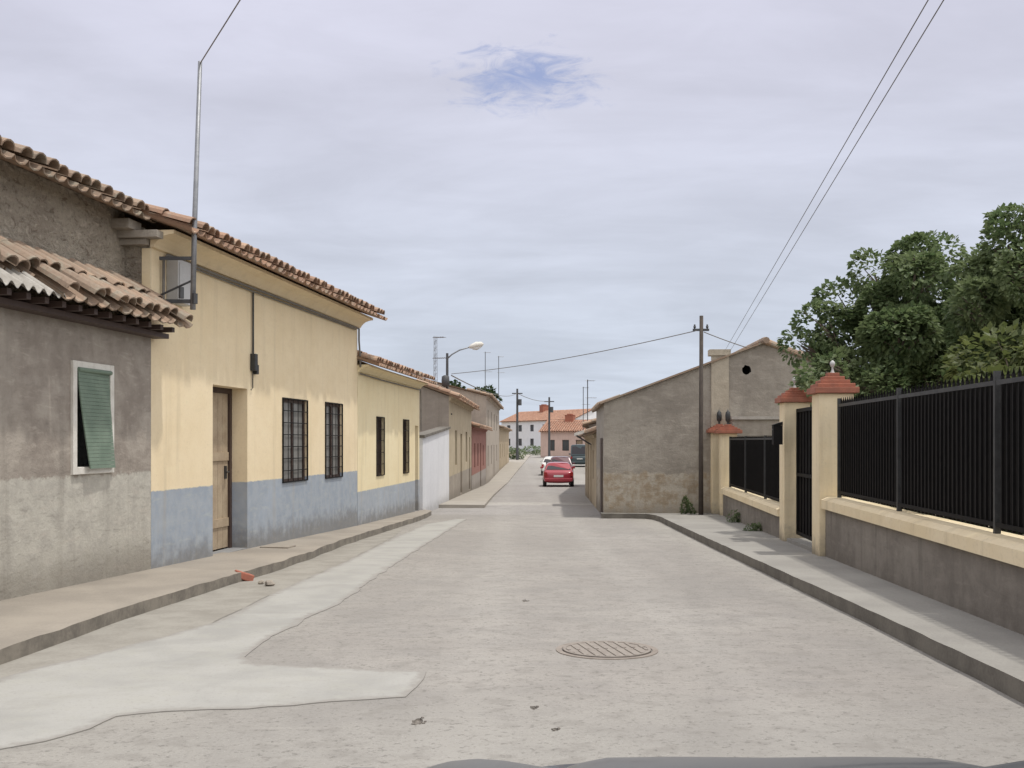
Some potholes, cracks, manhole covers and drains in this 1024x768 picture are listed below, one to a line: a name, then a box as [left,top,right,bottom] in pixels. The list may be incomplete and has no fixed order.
manhole cover [556,641,658,660]
